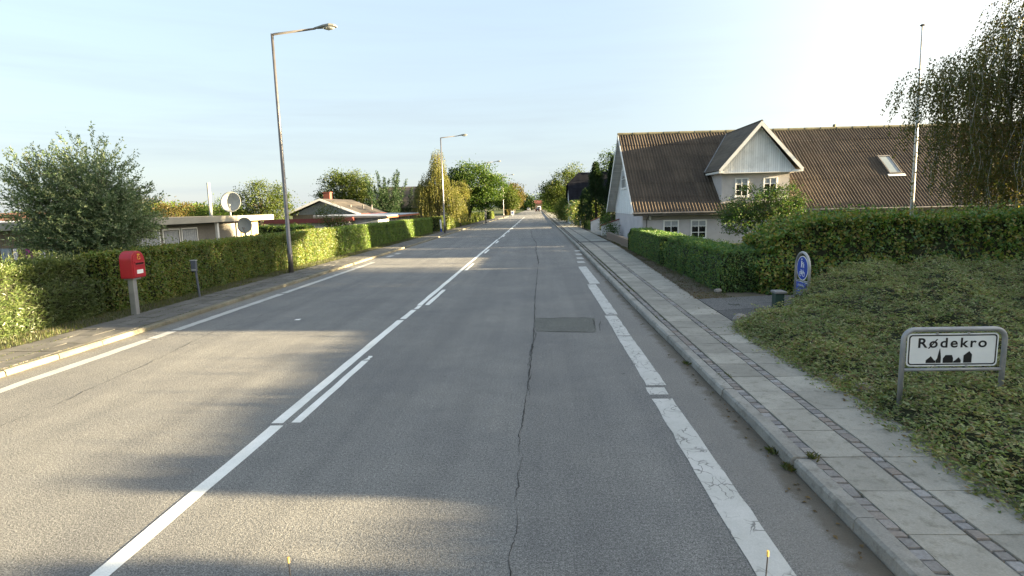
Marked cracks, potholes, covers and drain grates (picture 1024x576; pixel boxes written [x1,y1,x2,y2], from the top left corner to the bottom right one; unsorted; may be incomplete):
crack [508,231,539,576]
